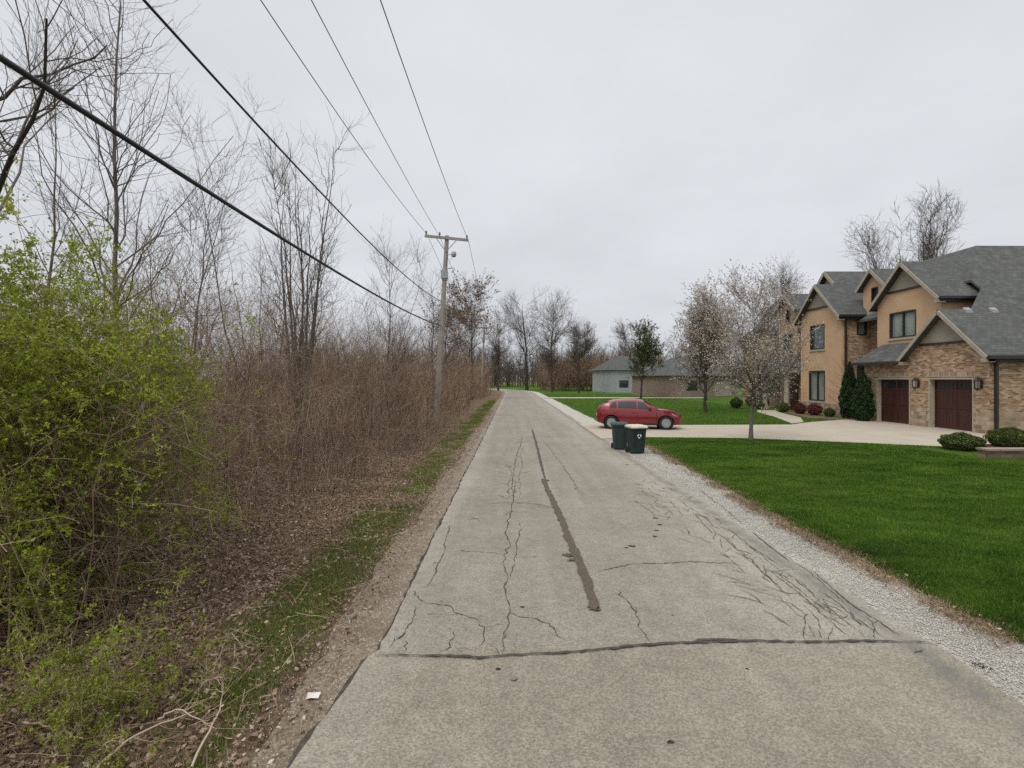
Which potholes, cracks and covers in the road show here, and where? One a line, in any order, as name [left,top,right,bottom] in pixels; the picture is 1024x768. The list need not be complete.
crack [390,438,561,654]
crack [601,479,894,639]
